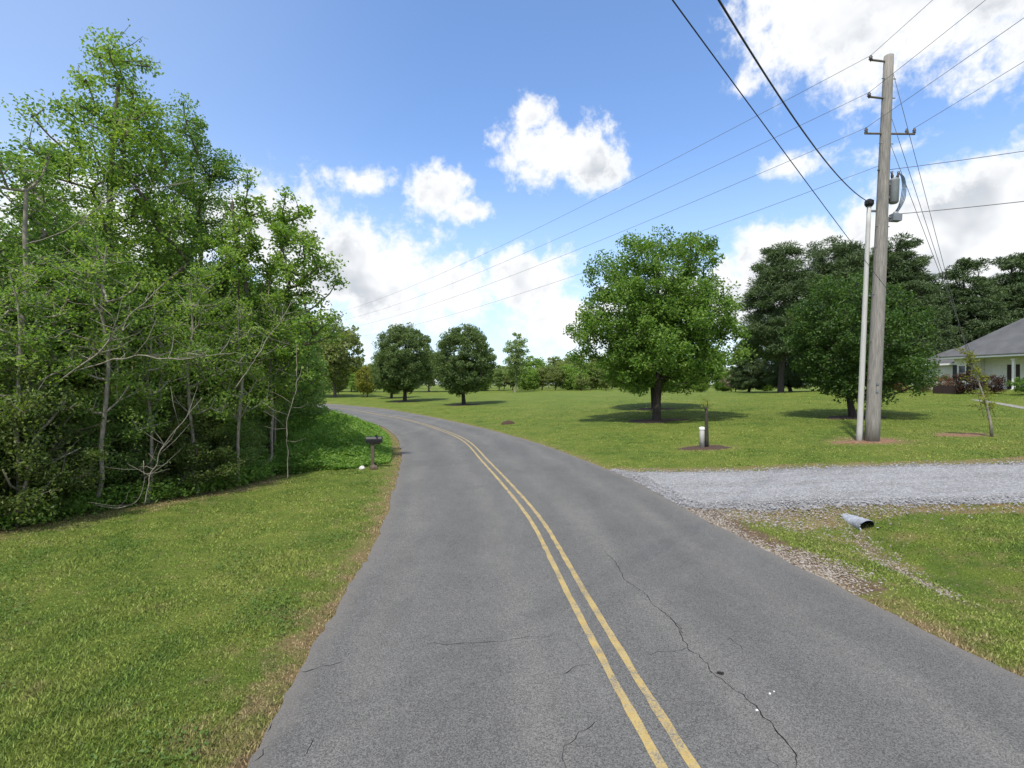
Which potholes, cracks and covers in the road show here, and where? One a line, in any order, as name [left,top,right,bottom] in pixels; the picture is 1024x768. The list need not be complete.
crack [607,554,797,768]
